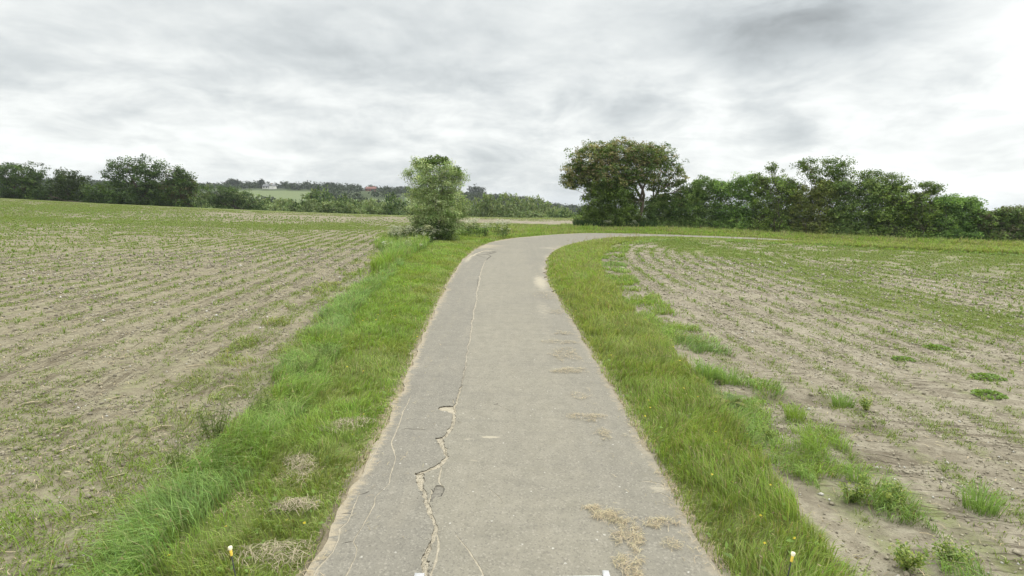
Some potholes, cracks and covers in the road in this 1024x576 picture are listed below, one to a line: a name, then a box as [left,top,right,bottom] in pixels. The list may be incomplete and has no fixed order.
crack [416,250,496,576]
pothole [430,486,444,502]
crack [313,396,423,576]
